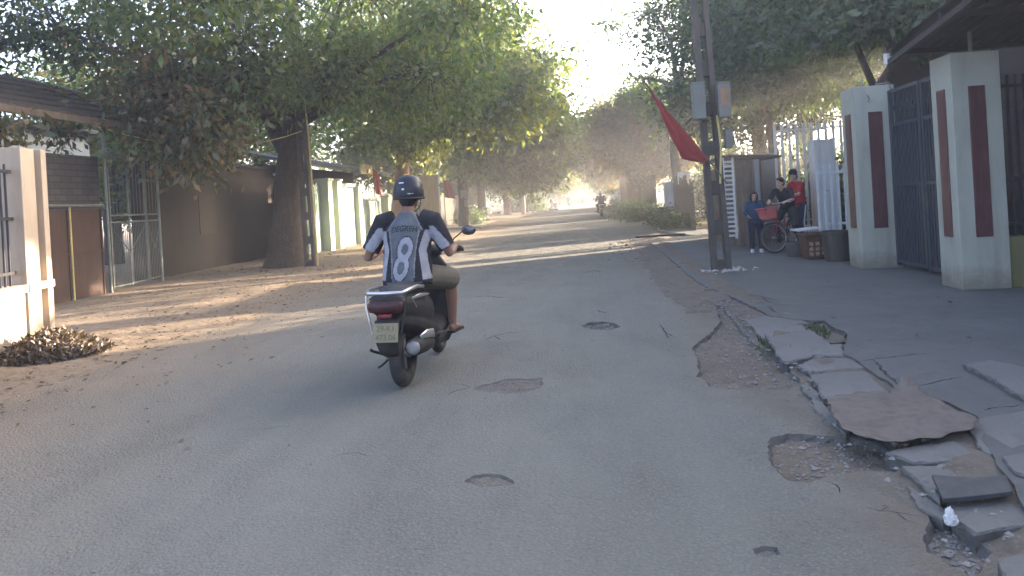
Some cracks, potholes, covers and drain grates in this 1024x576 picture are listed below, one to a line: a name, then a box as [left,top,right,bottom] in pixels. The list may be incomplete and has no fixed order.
pothole [767,433,897,483]
pothole [753,546,780,557]
pothole [692,304,801,390]
